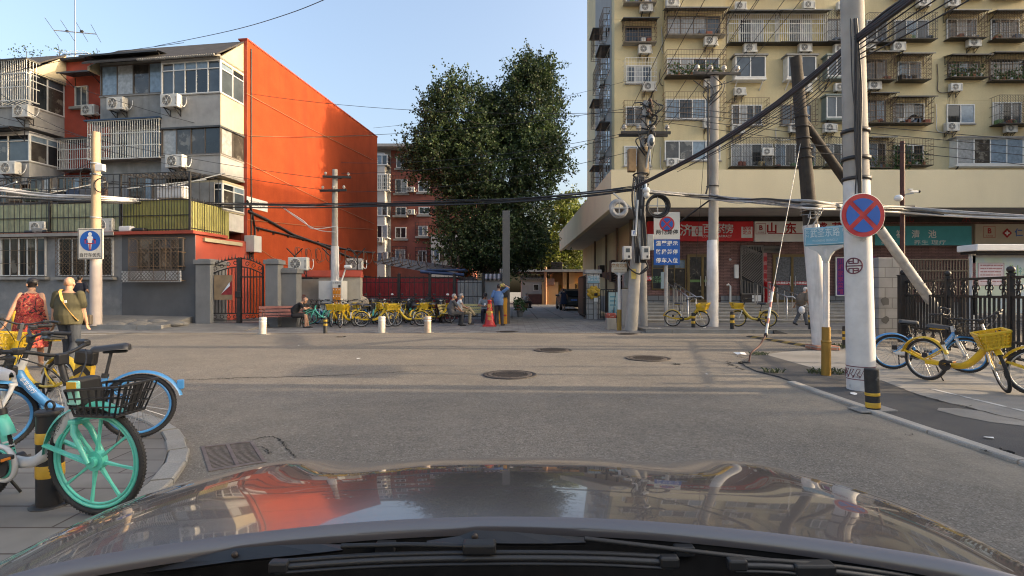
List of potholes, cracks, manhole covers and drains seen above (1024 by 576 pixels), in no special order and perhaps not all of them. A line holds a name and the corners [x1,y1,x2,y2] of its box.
crack [253,436,296,457]
manhole cover [483,370,537,379]
drain grate [201,441,267,472]
